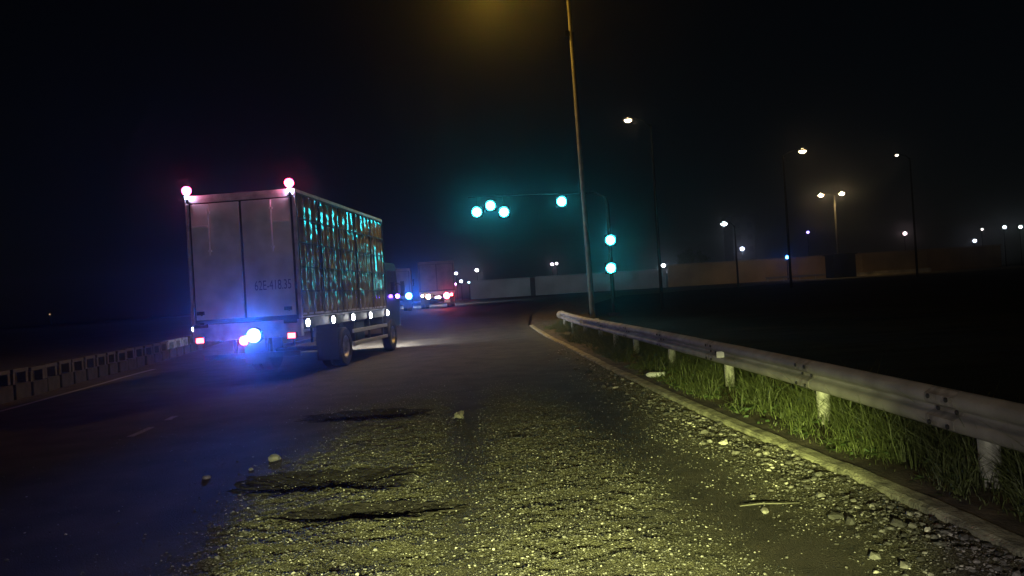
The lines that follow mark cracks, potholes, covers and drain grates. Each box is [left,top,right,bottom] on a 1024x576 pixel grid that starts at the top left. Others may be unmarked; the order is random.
pothole [294,408,432,423]
pothole [226,467,422,497]
pothole [259,501,468,526]
